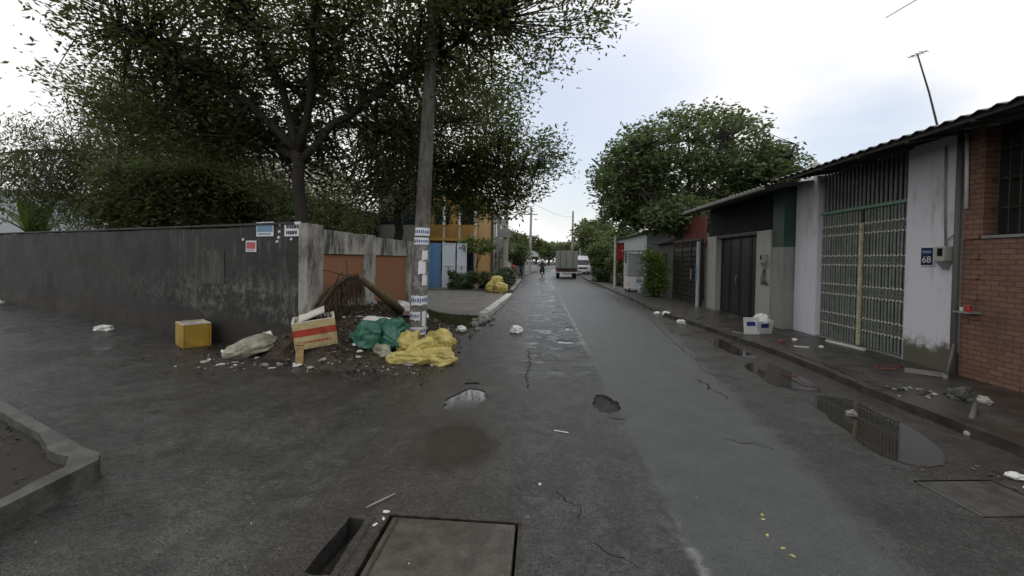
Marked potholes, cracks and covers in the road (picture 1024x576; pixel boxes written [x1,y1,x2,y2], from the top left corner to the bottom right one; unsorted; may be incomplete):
manhole cover [916,481,1024,518]
crack [519,348,577,393]
manhole cover [351,513,521,576]
pothole [593,394,621,414]
drain grate [305,517,375,576]
